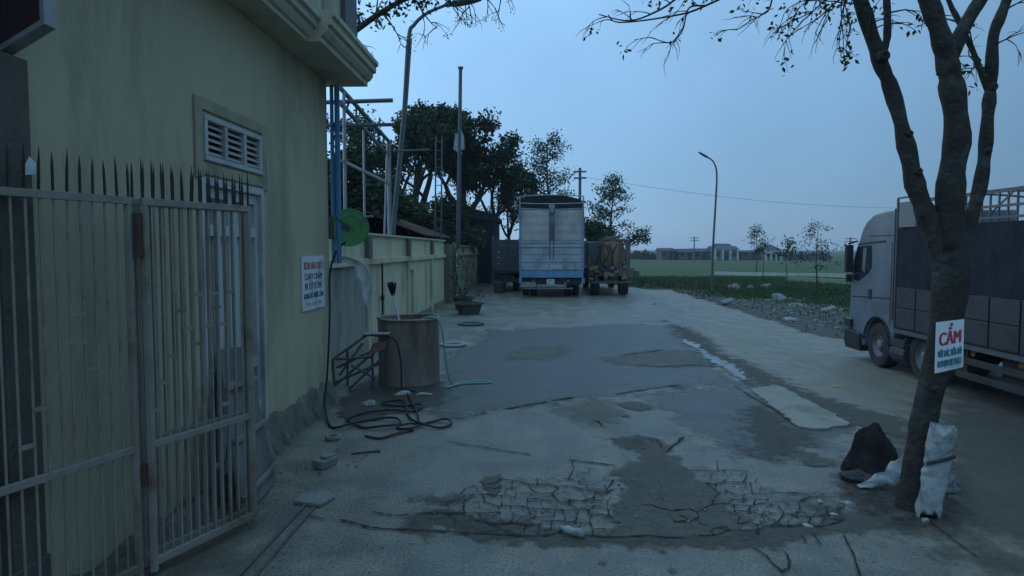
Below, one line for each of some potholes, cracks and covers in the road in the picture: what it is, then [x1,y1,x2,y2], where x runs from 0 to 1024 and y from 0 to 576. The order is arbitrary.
crack [308,459,671,538]
crack [503,397,572,409]
crack [644,437,861,576]
